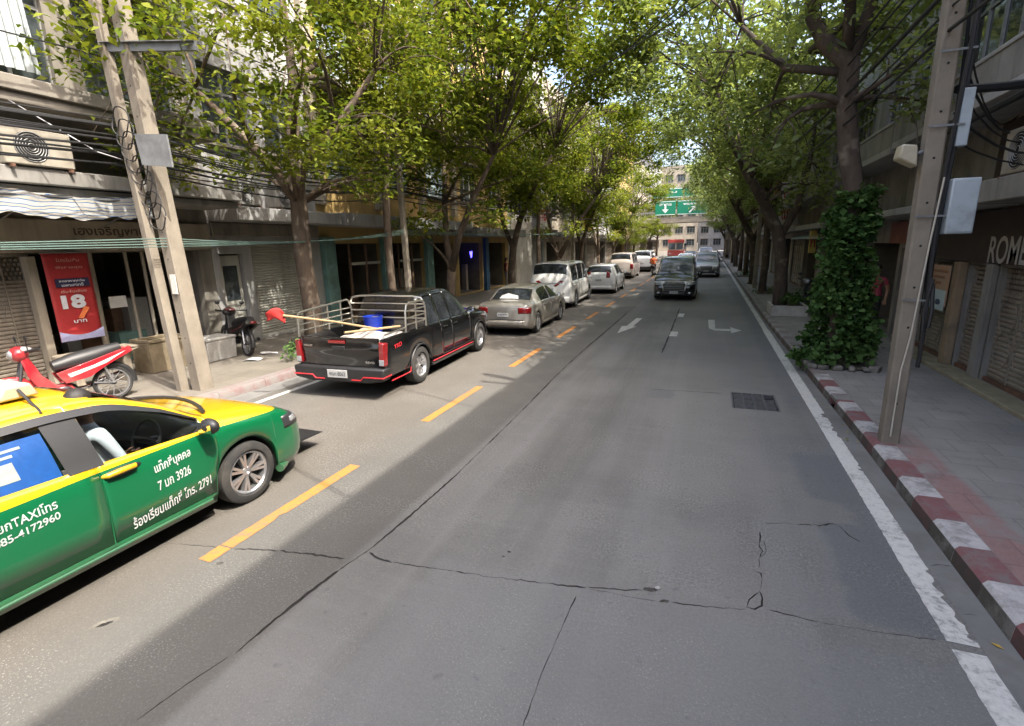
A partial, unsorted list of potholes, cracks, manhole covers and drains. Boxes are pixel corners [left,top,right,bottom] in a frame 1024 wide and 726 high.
crack [369,523,935,726]
crack [148,539,345,559]
